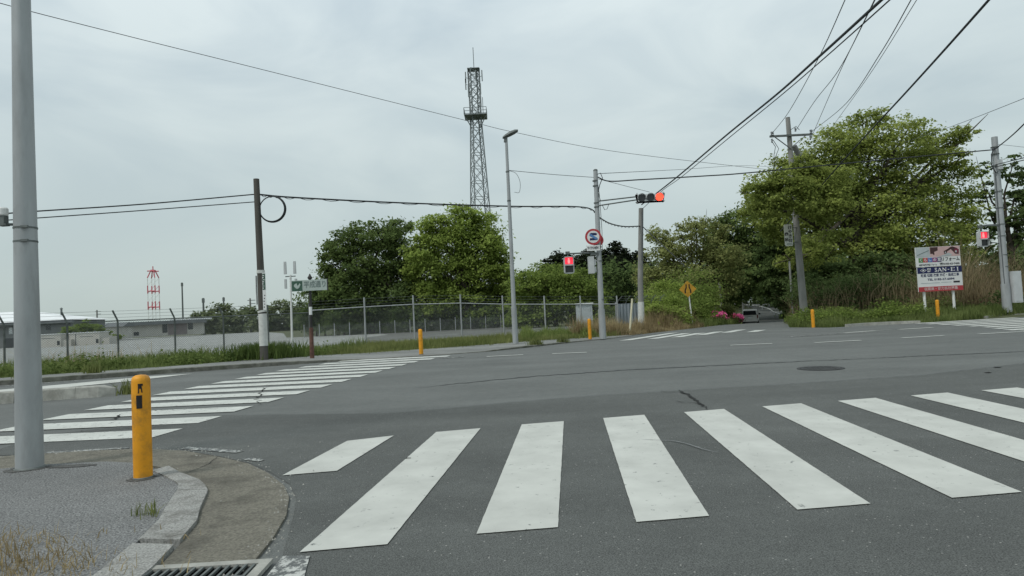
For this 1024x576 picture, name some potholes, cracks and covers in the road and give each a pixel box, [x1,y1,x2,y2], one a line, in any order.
drain grate [144,558,273,576]
crack [663,390,707,409]
